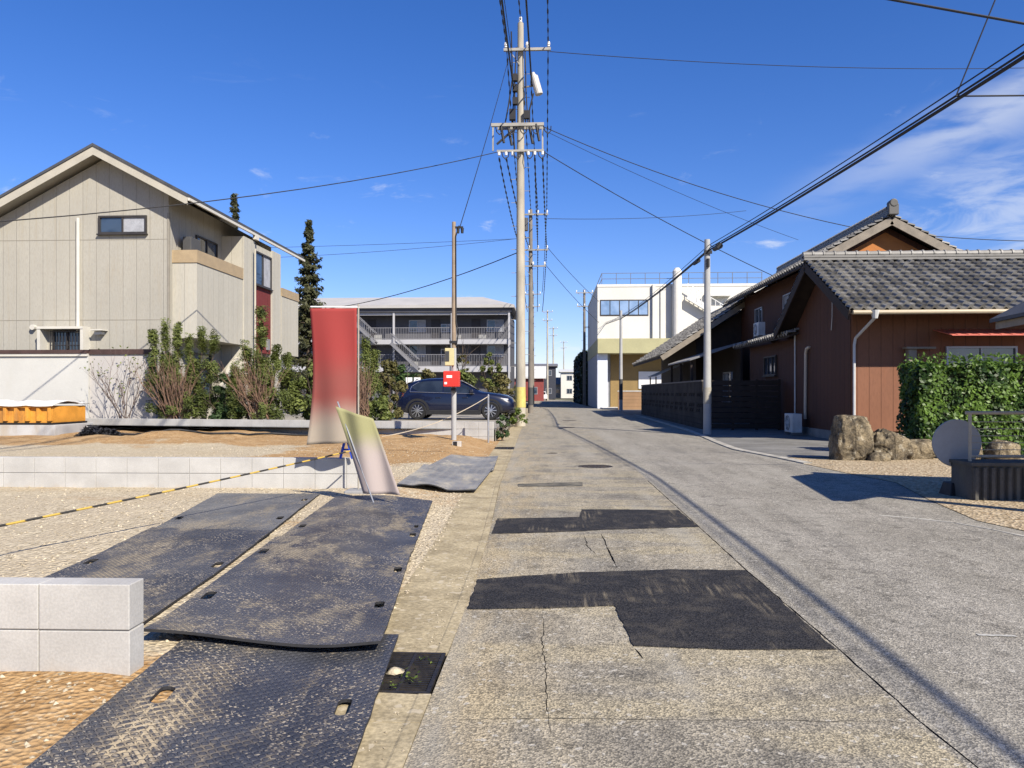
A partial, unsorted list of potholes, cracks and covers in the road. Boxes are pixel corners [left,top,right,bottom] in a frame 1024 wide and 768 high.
drain grate [379,652,446,696]
crack [584,536,617,567]
crack [445,615,914,733]
